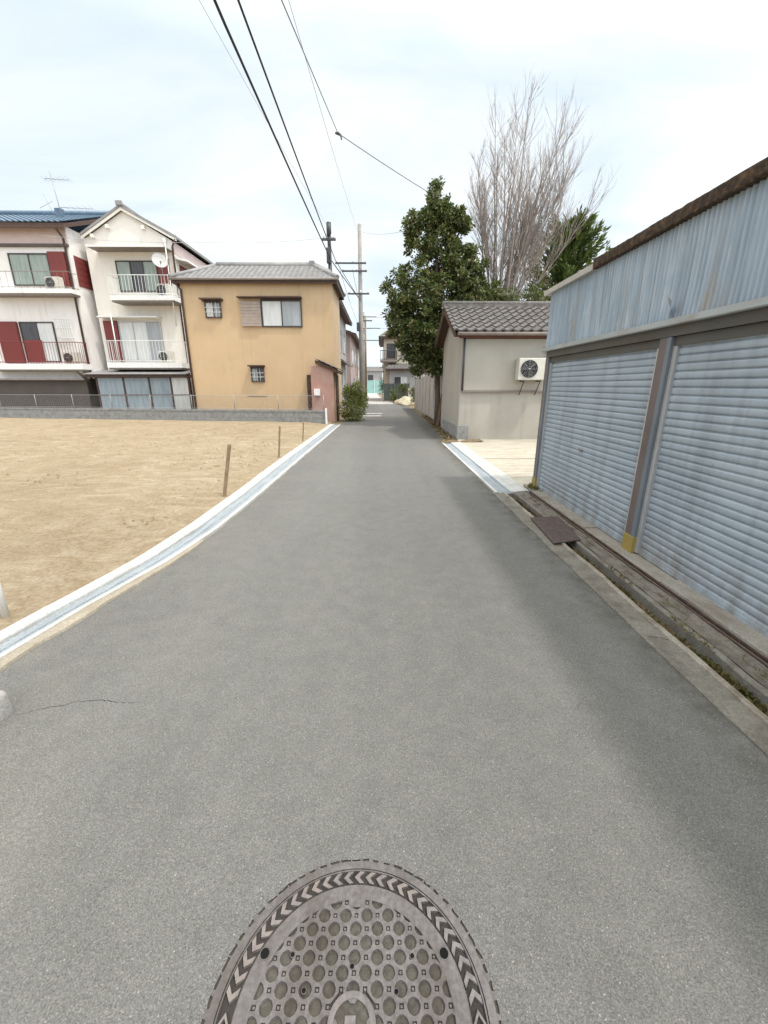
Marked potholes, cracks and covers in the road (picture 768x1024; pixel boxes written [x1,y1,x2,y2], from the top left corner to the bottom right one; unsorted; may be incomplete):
manhole cover [201,859,501,1024]
crack [17,700,135,715]
